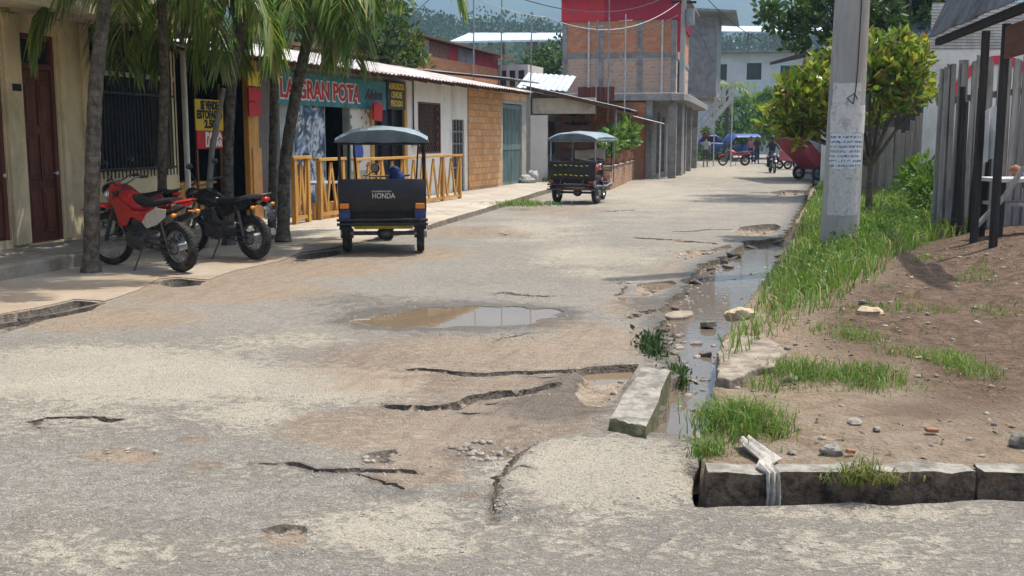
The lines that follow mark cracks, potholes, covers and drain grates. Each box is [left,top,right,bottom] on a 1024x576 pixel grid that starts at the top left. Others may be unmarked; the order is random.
pothole [734,224,781,236]
crack [7,410,141,431]
pothole [347,302,582,328]
pothole [564,359,639,407]
pothole [620,280,692,297]
crack [258,457,432,491]
crack [379,365,591,417]
crack [632,229,732,245]
crack [465,440,541,528]
crack [491,291,564,299]
